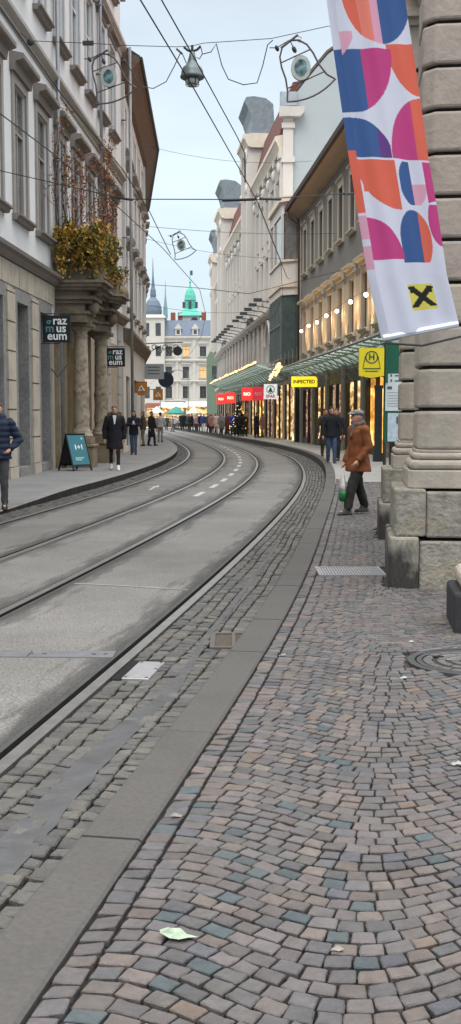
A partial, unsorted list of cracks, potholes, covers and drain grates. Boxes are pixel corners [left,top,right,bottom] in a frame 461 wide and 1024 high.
drain grate [315,566,386,578]
manhole cover [407,648,461,677]
